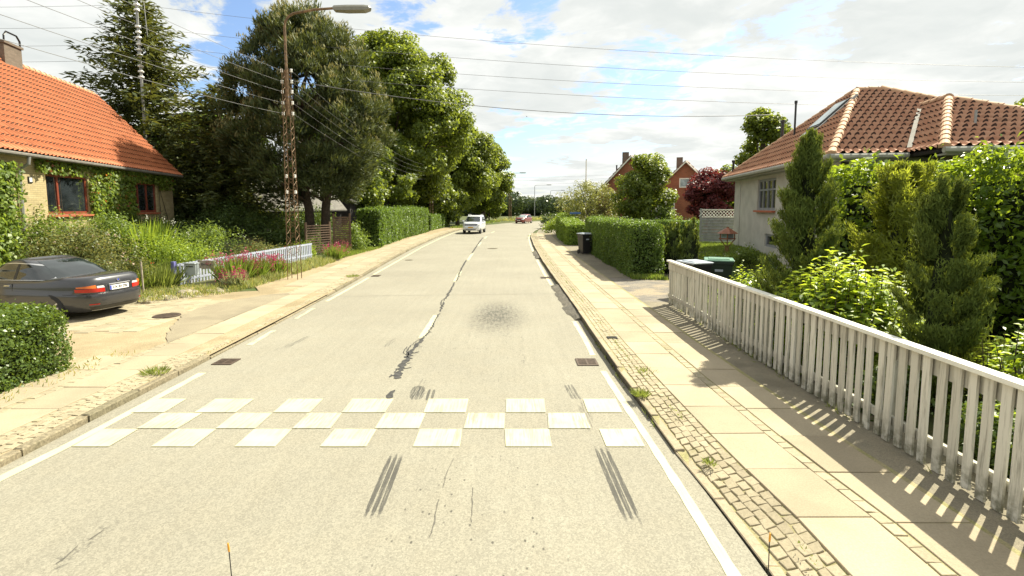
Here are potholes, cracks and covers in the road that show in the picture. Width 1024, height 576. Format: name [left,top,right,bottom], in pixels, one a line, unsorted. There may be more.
crack [386,239,482,399]
drain grate [575,358,599,366]
crack [429,458,454,537]
